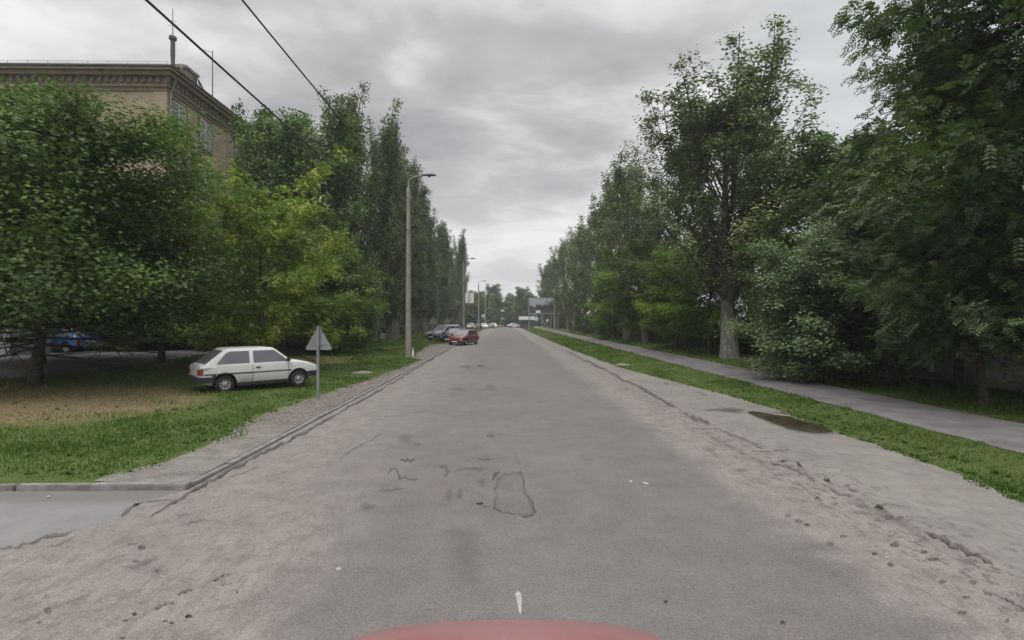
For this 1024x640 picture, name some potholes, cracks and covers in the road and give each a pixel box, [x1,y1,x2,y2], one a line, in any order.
crack [439,464,450,478]
crack [0,529,79,550]
pothole [747,411,834,433]
crack [121,499,207,524]
crack [338,433,418,492]
